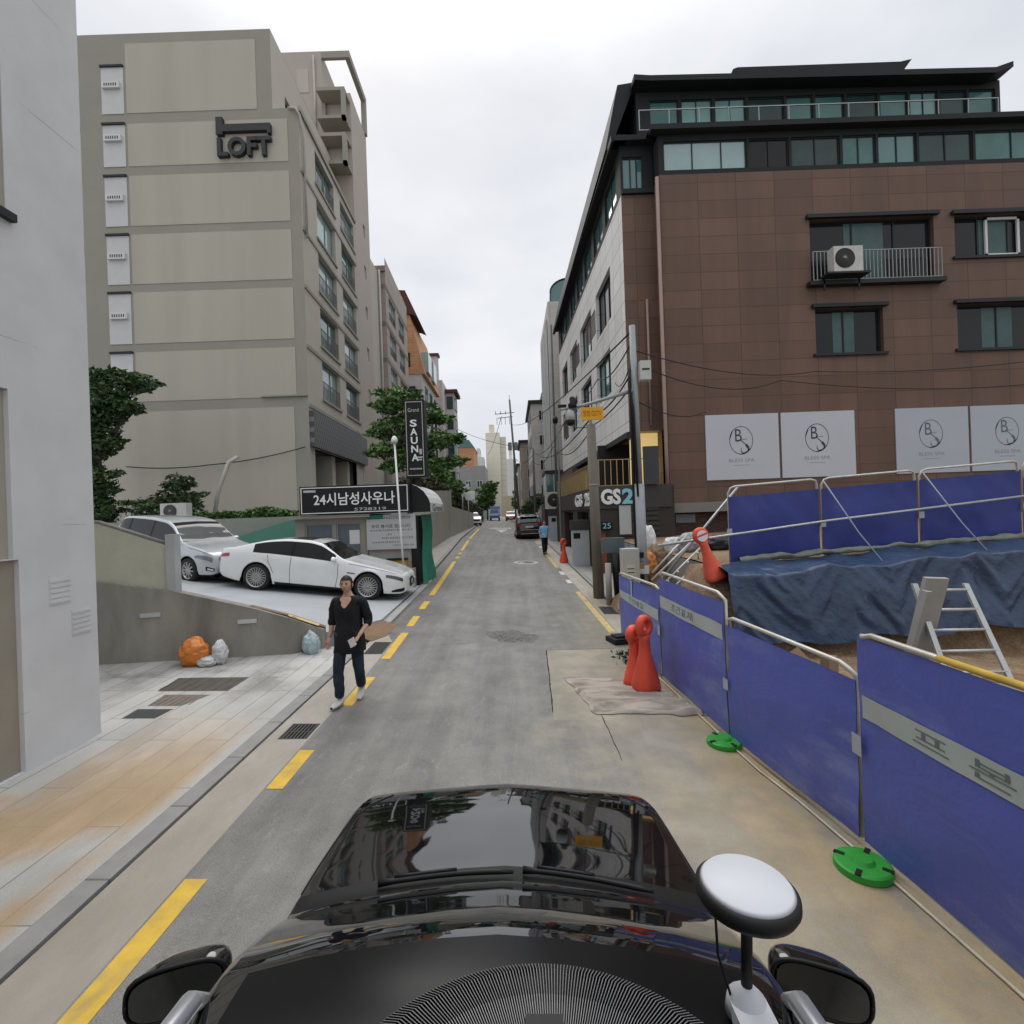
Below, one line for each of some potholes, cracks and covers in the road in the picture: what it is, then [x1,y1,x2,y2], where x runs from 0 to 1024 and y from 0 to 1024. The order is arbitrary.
drain grate [599,607,619,621]
drain grate [364,642,392,654]
drain grate [278,724,320,739]
